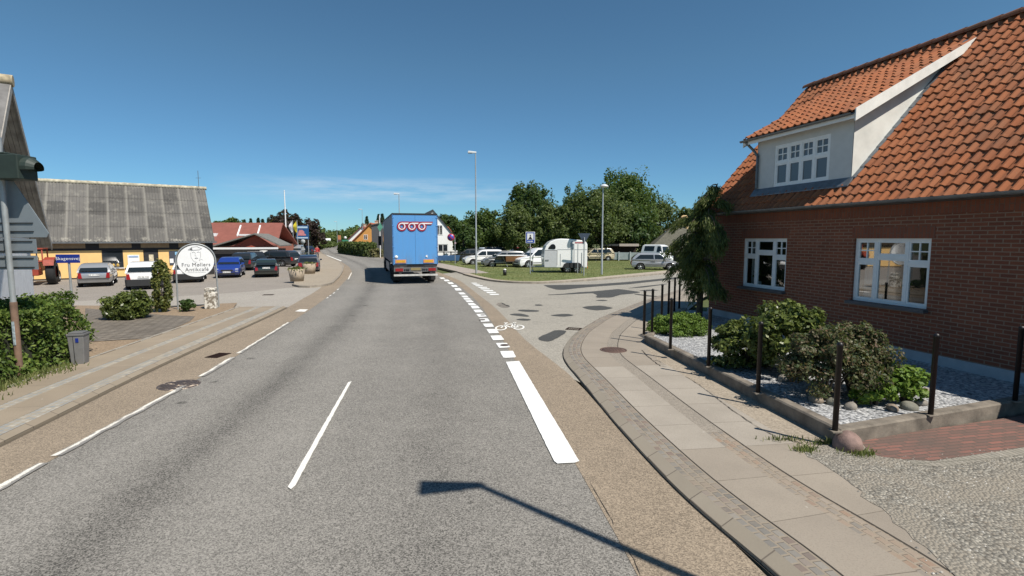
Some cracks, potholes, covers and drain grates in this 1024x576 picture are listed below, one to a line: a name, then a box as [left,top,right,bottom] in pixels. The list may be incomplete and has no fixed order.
manhole cover [156,380,201,391]
